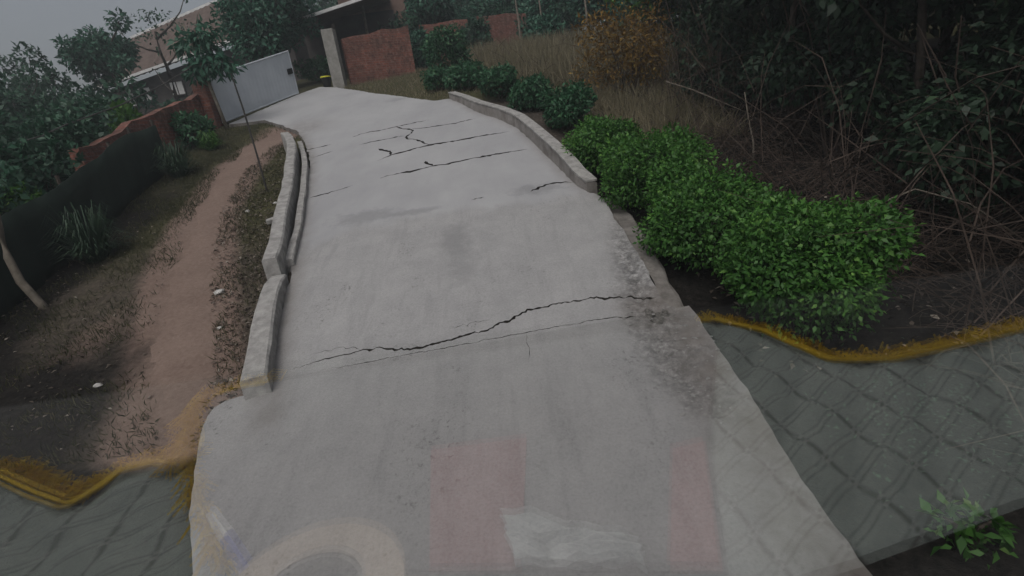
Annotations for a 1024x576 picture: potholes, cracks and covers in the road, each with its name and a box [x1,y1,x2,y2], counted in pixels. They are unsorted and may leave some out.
crack [294,295,653,370]
crack [357,118,525,176]
